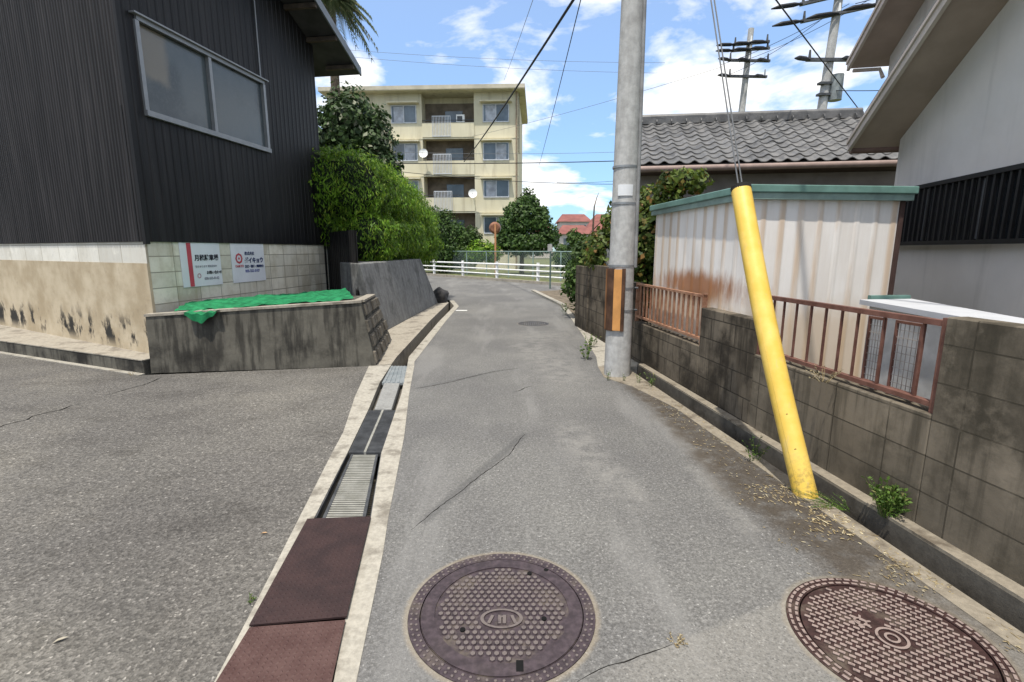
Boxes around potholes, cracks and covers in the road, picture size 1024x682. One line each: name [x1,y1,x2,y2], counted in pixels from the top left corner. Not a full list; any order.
drain grate [315,454,381,520]
crack [415,434,525,527]
crack [577,644,672,682]
manhole cover [408,554,595,682]
manhole cover [786,578,1022,682]
crack [0,403,82,427]
